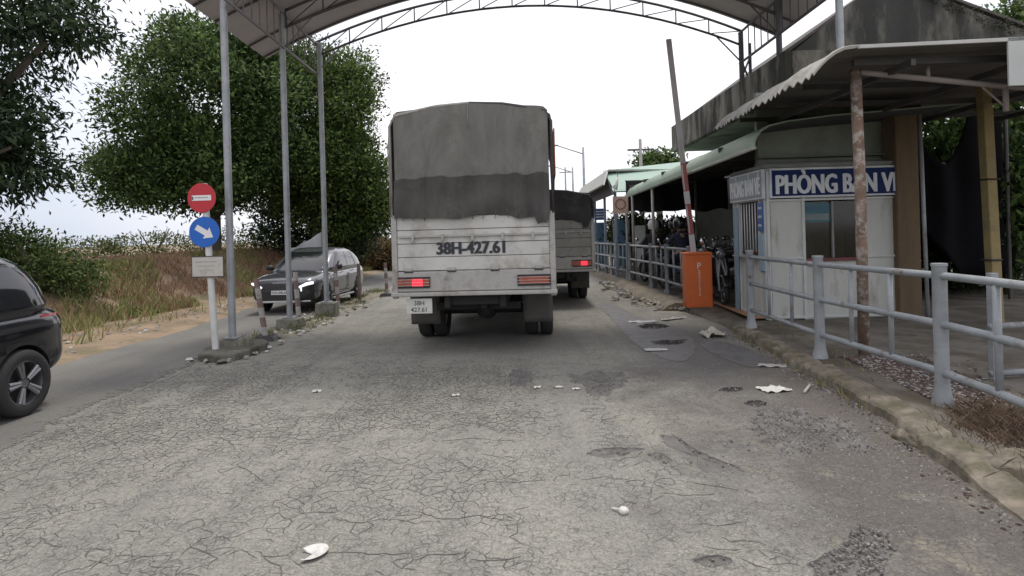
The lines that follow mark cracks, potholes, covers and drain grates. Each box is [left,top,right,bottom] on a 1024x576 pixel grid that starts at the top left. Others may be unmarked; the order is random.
pothole [647,452,673,464]
pothole [693,554,733,567]
pothole [659,434,747,476]
pothole [806,521,899,576]
crack [0,346,803,576]
pothole [586,447,644,458]
